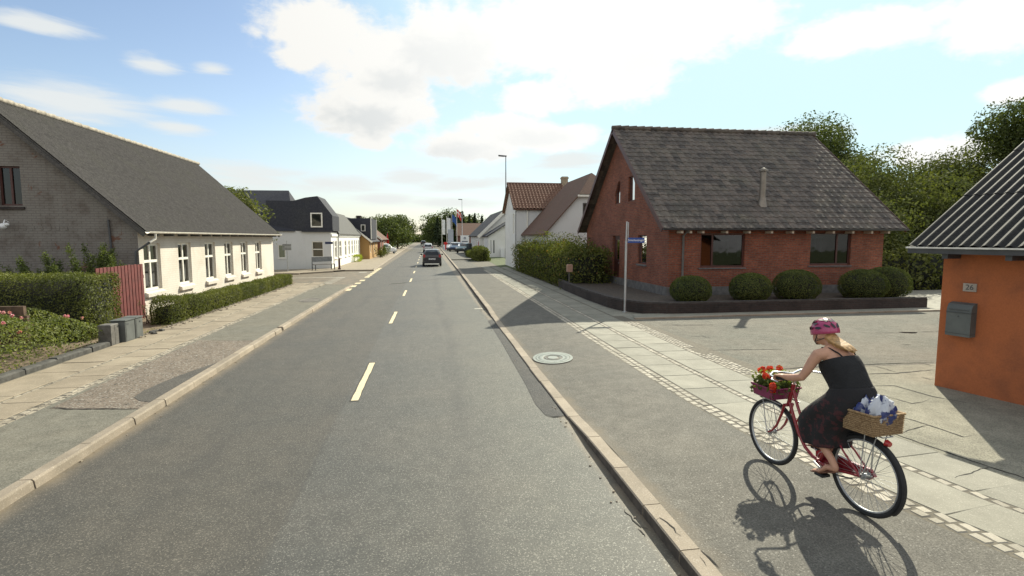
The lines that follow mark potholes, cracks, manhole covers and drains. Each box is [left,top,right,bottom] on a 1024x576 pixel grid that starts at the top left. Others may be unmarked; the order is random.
manhole cover [533,352,573,364]
crack [624,510,680,535]
